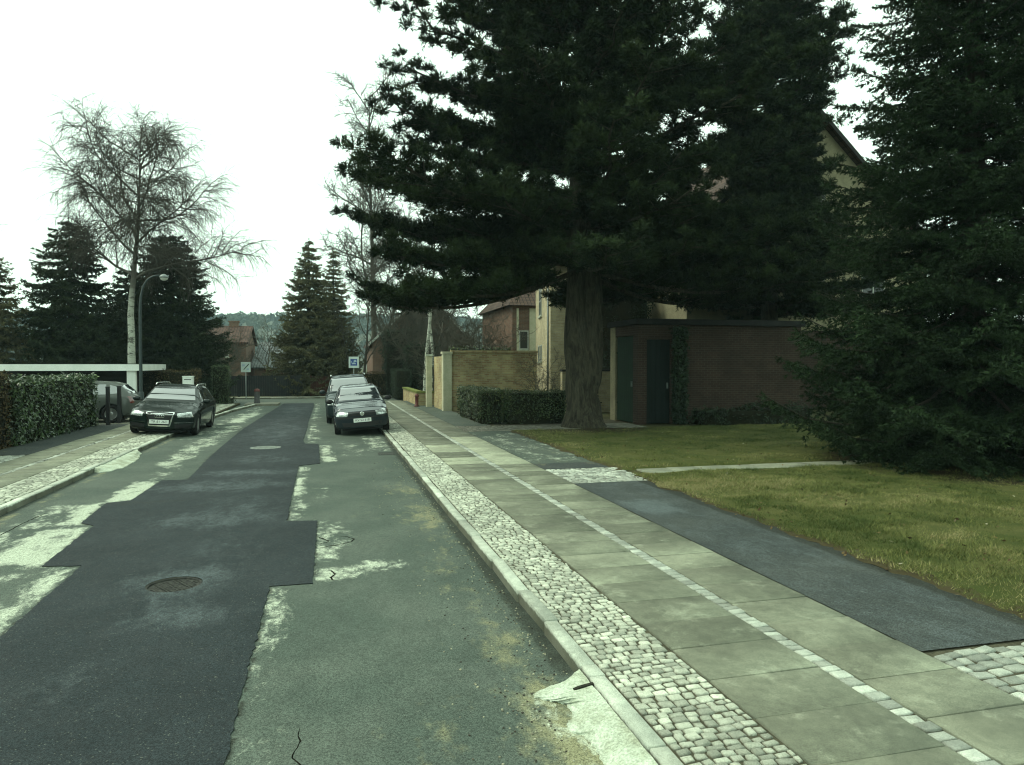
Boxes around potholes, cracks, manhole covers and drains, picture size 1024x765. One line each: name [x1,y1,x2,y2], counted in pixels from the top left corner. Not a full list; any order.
manhole cover [145,577,202,592]
crack [292,727,301,765]
